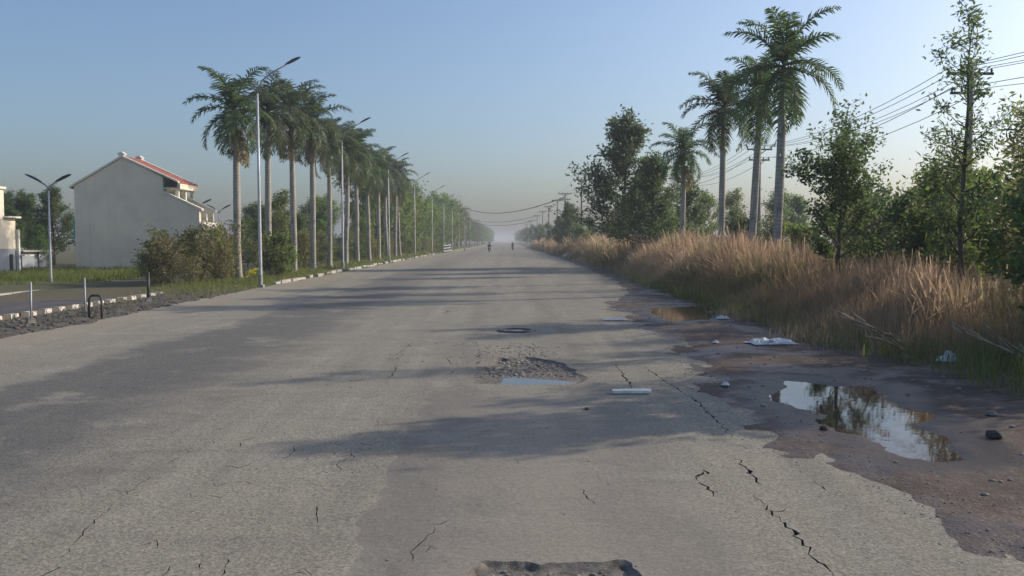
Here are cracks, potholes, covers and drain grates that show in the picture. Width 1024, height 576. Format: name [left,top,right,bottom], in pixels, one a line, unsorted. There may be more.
crack [615,365,834,576]
pothole [463,560,642,576]
crack [42,422,388,576]
crack [410,520,448,559]
pothole [456,346,588,385]
